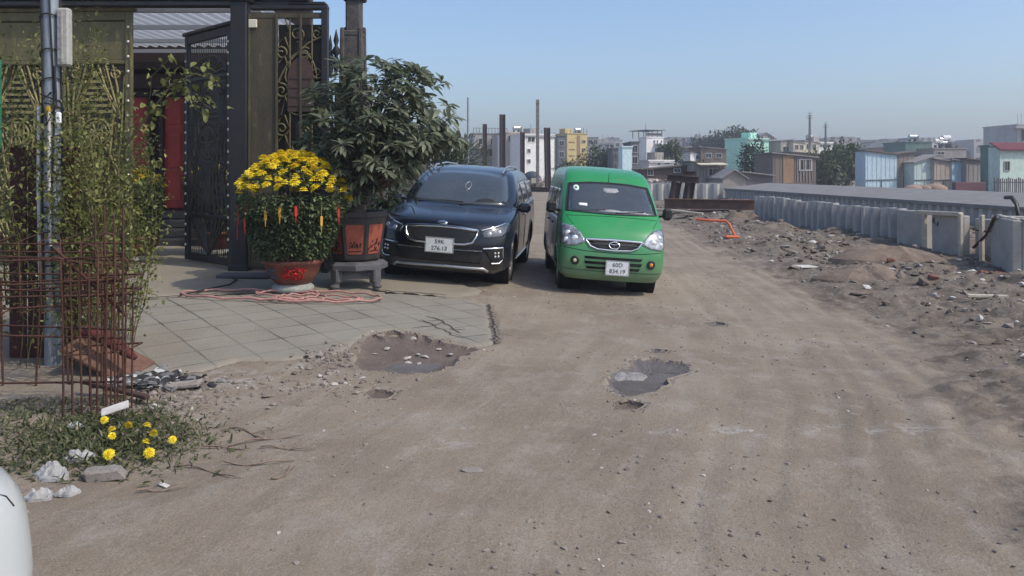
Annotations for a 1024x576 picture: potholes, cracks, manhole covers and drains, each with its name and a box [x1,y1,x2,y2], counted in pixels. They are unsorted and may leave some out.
pothole [613,399,647,411]
pothole [343,330,487,378]
pothole [363,388,397,400]
pothole [600,356,697,403]
crack [485,304,522,343]
crack [413,316,463,338]
